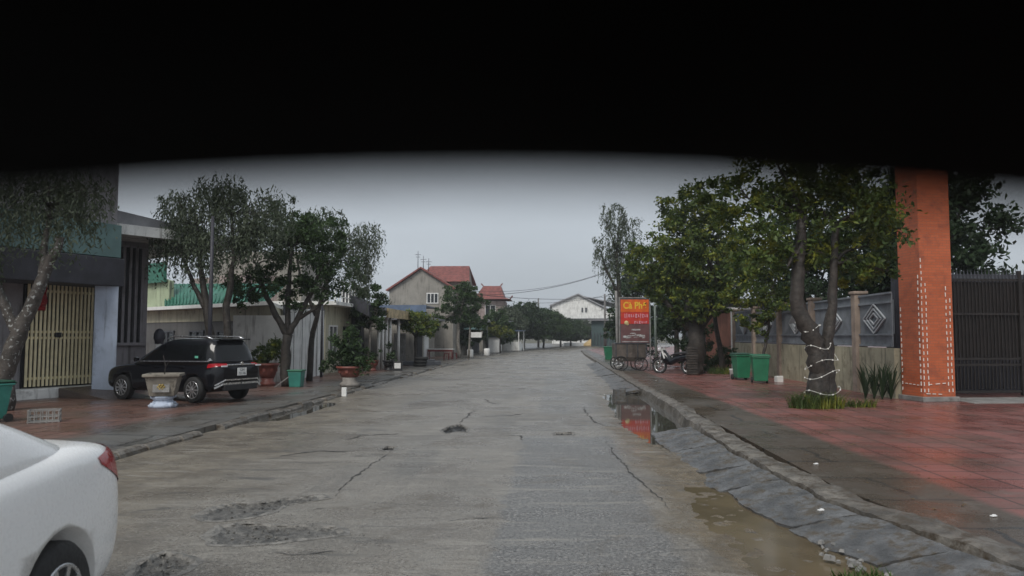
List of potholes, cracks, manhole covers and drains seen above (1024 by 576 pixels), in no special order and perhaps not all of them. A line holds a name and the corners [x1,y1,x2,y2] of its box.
pothole [199,522,350,547]
crack [583,408,669,510]
pothole [191,494,333,522]
pothole [124,550,203,576]
pothole [439,424,470,434]
